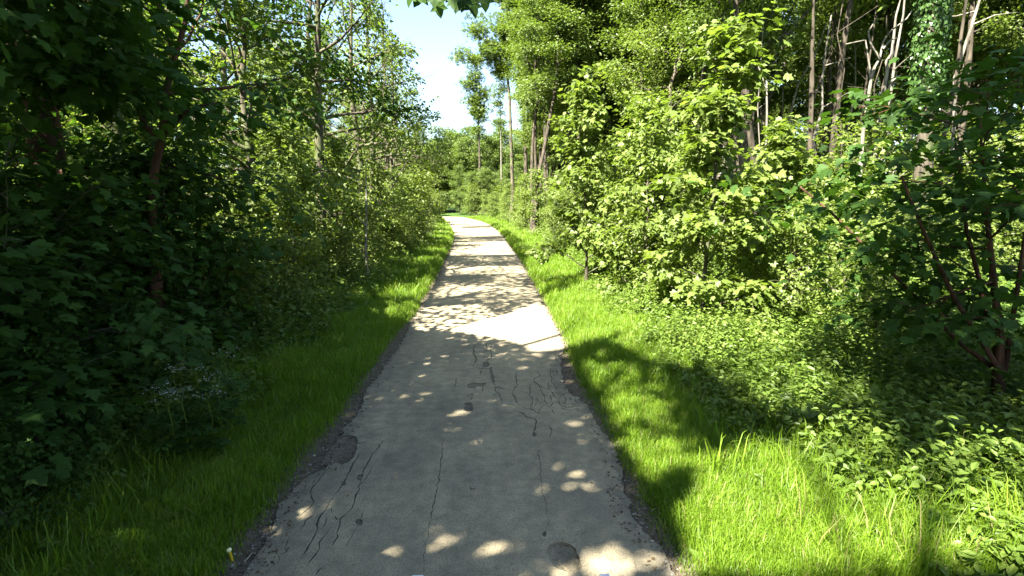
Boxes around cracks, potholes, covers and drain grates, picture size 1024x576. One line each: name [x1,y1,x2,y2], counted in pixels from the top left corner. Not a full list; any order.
crack [455,344,581,438]
pothole [547,542,582,572]
crack [267,434,383,576]
pothole [320,435,358,467]
